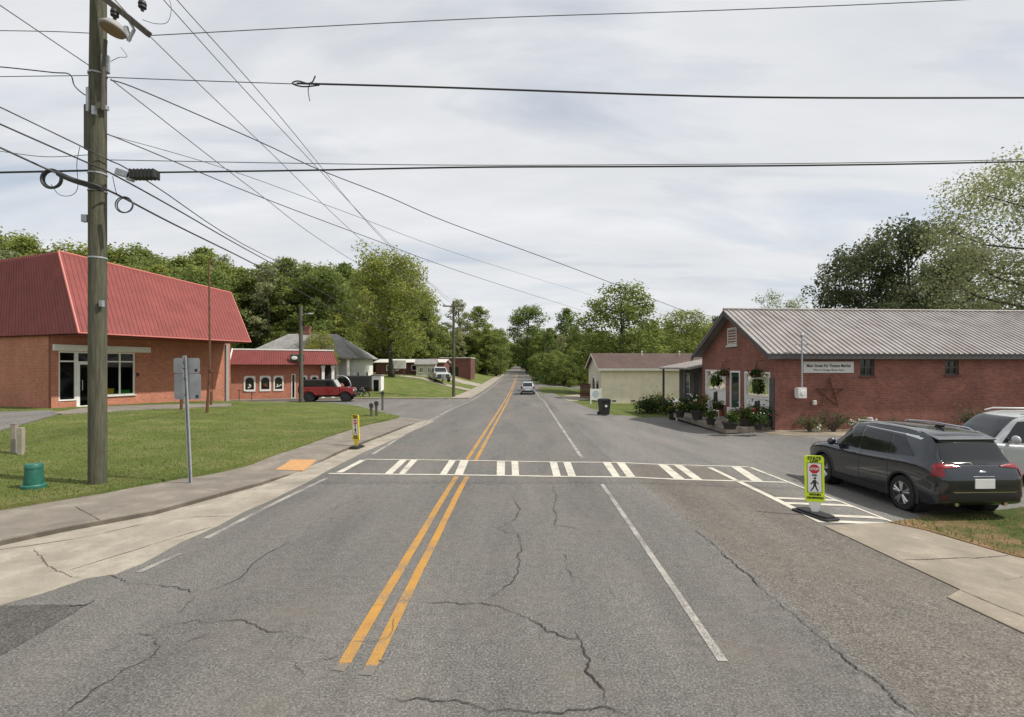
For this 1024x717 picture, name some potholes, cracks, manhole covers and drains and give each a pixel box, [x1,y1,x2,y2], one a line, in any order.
crack [61,619,315,715]
crack [390,498,633,716]
